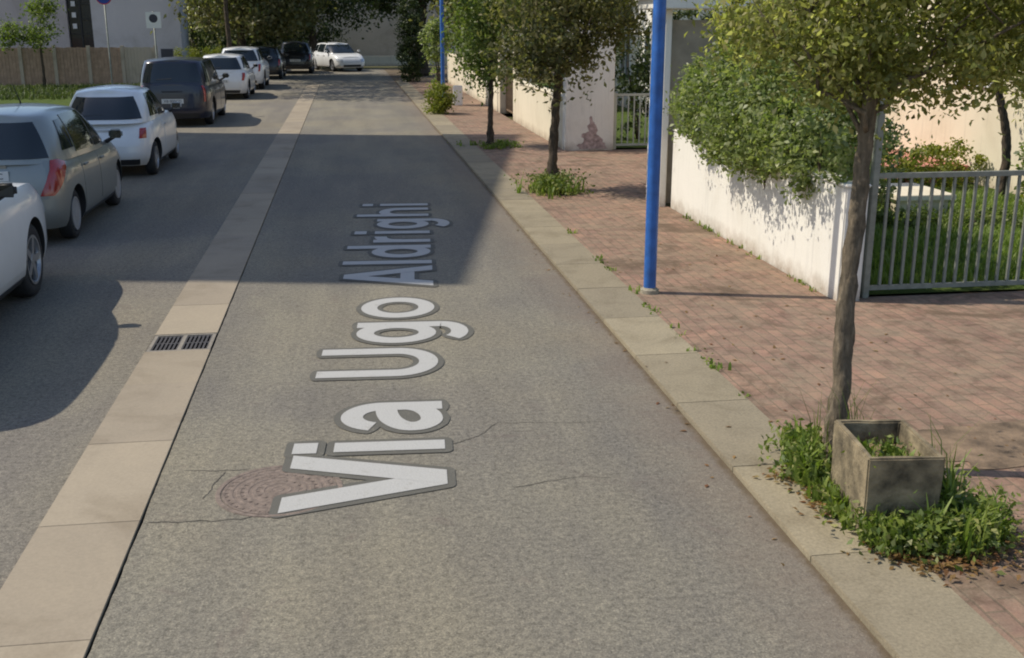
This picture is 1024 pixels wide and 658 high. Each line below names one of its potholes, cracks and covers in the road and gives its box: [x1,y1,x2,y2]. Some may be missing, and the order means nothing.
manhole cover [215,465,343,518]
crack [148,469,266,523]
drain grate [146,333,217,352]
